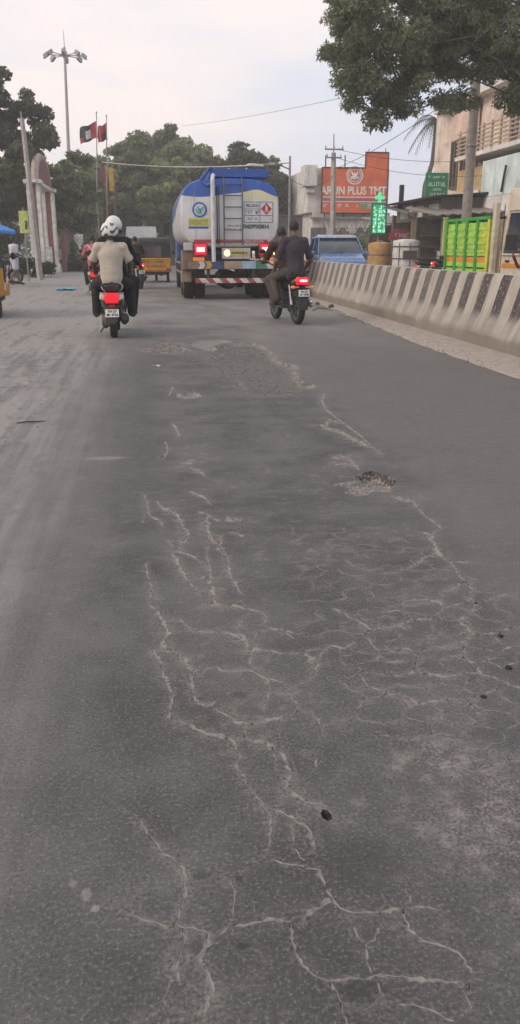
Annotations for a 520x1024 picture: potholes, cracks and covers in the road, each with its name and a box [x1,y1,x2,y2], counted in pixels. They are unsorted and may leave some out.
crack [133,460,520,1024]
pothole [334,471,397,496]
crack [317,393,380,470]
